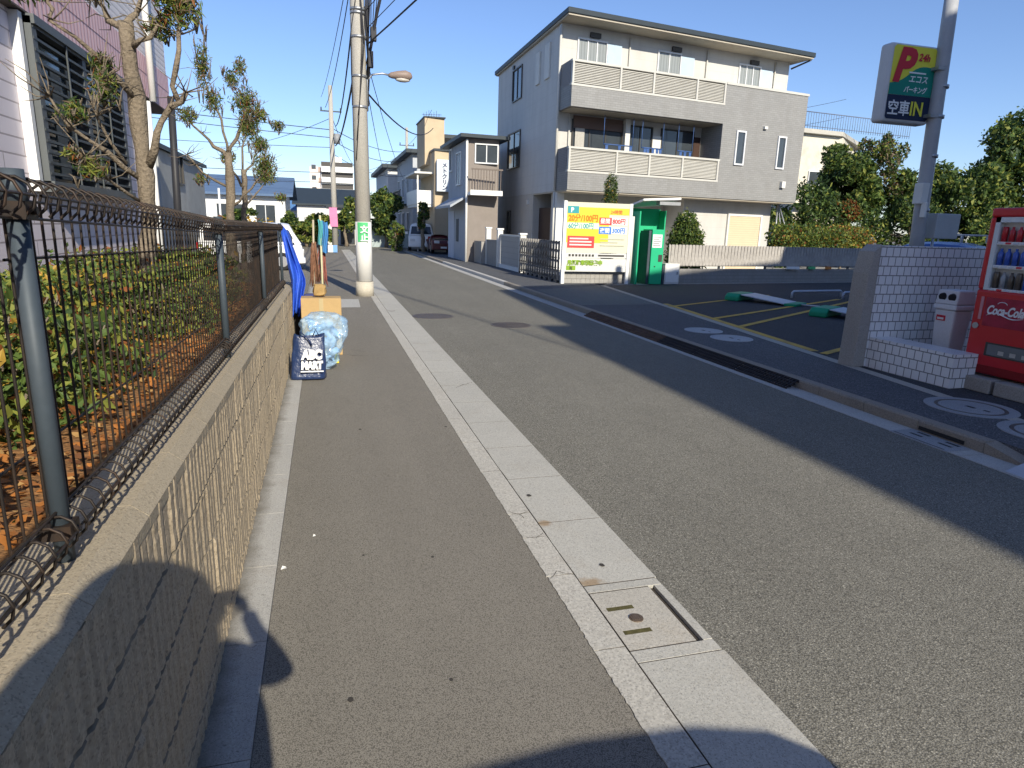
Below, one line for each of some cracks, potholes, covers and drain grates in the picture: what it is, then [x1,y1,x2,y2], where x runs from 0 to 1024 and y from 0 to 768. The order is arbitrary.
drain grate [691,348,745,370]
manhole cover [923,397,1021,419]
drain grate [629,326,666,342]
manhole cover [996,420,1024,439]
drain grate [734,362,799,389]
drain grate [657,336,702,354]
manhole cover [584,578,721,664]
